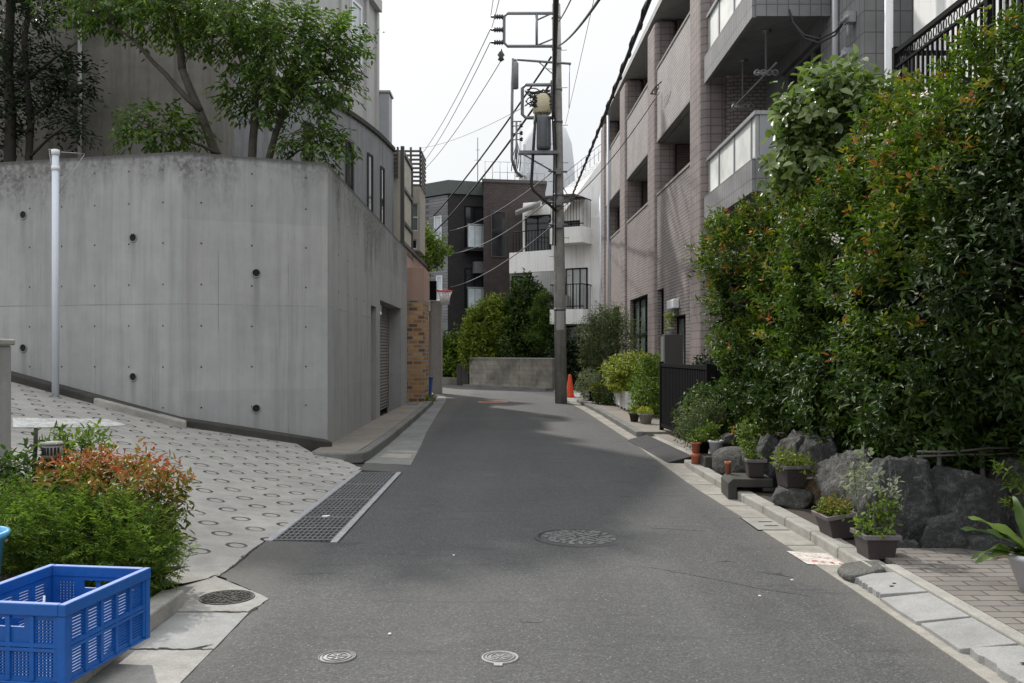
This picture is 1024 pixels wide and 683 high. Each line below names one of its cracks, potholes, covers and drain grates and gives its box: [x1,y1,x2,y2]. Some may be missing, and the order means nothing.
manhole cover [198,590,255,605]
drain grate [741,517,788,531]
manhole cover [318,650,356,664]
drain grate [266,470,402,543]
manhole cover [481,651,519,667]
manhole cover [534,528,622,547]
